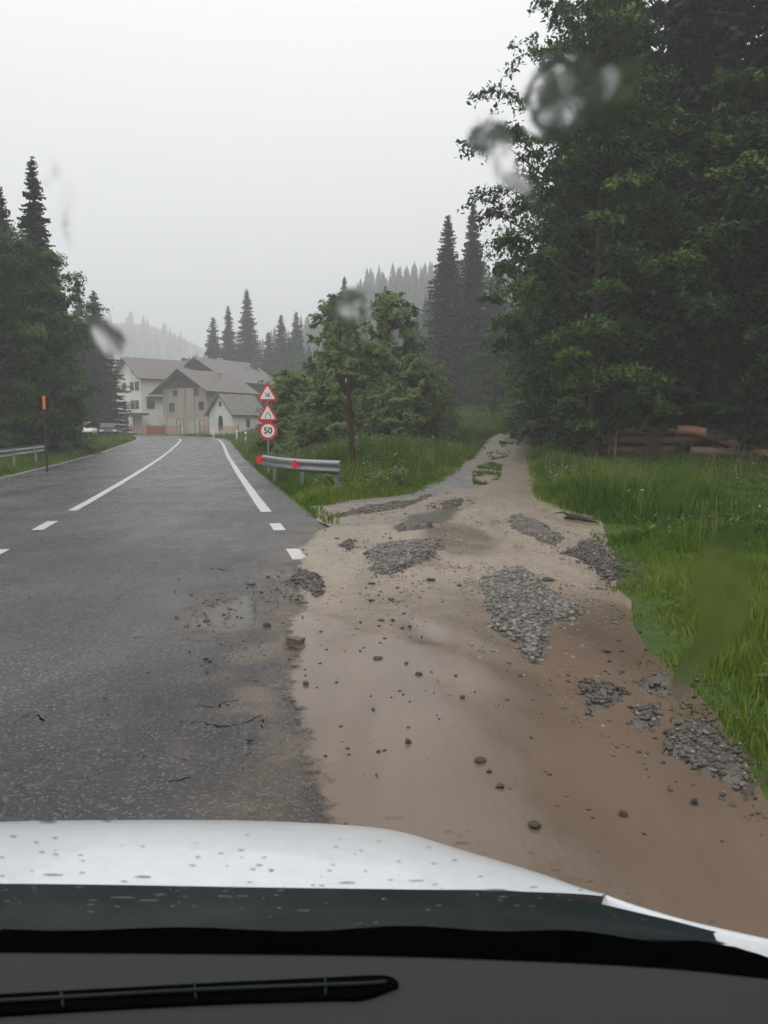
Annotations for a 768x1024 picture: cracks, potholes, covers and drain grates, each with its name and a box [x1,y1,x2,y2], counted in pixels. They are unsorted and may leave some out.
pothole [199,591,258,630]
crack [190,699,265,729]
